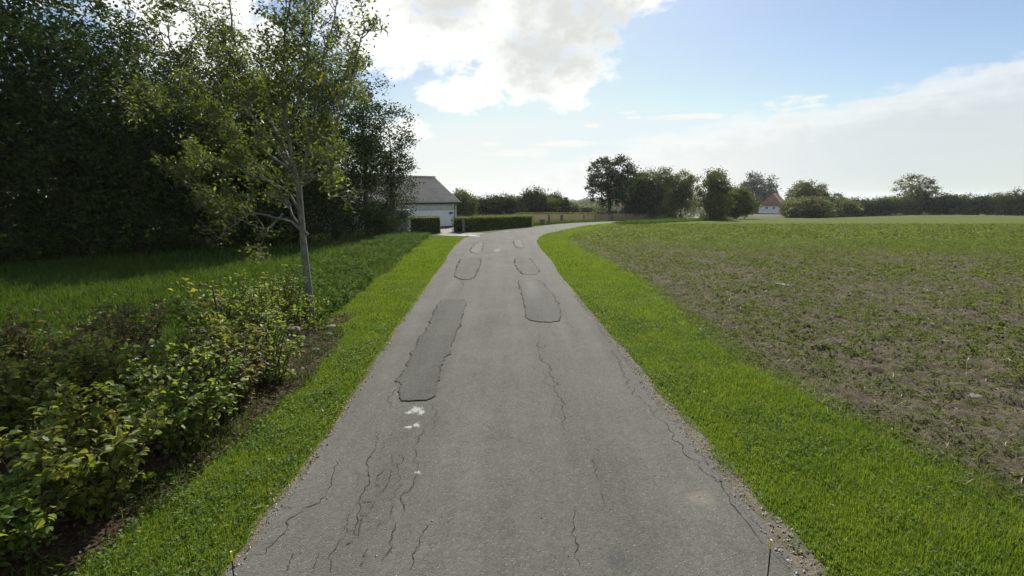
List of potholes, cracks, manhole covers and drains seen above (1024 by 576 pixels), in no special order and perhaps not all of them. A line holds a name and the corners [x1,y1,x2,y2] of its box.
crack [313,410,438,573]
crack [611,349,793,571]
crack [246,460,338,571]
